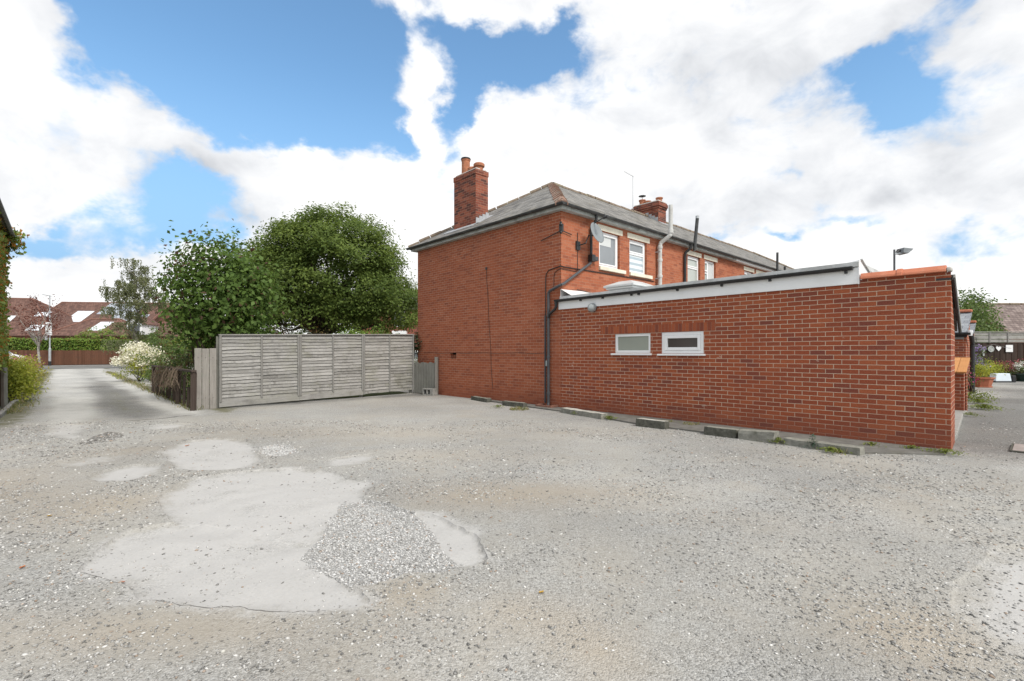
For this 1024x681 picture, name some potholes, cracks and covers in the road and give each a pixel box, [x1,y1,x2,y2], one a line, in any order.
pothole [77,431,132,445]
